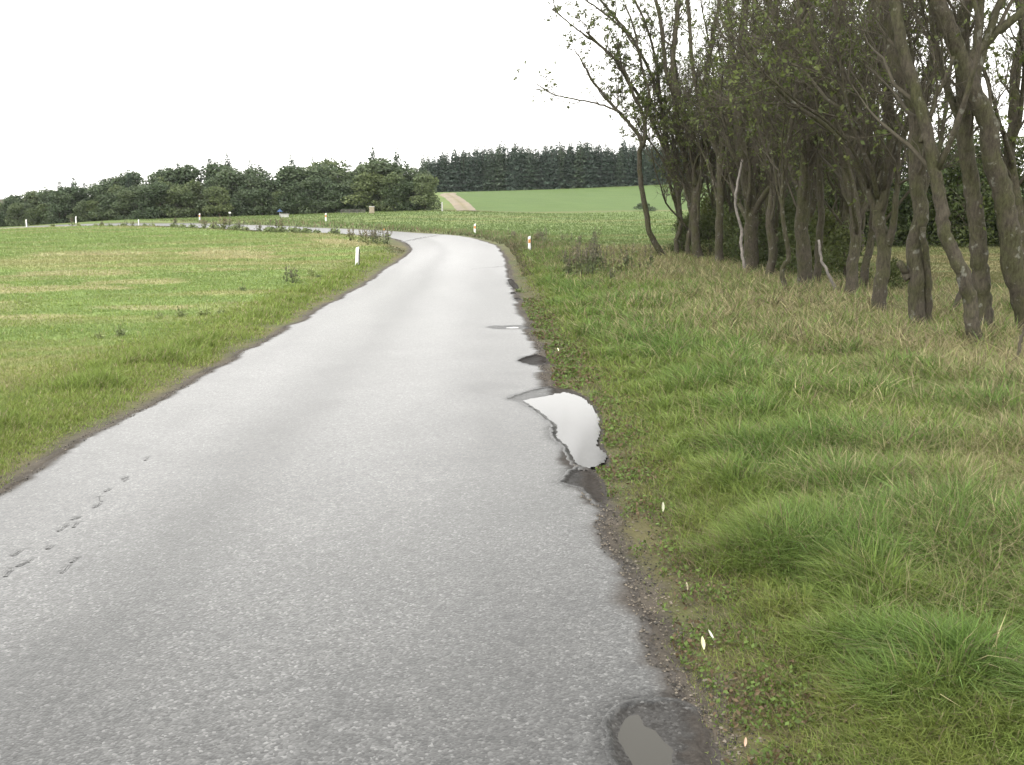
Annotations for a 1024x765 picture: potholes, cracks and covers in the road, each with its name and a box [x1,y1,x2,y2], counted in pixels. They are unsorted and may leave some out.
pothole [505,386,612,472]
pothole [517,354,551,366]
pothole [601,697,721,765]
pothole [557,466,609,507]
